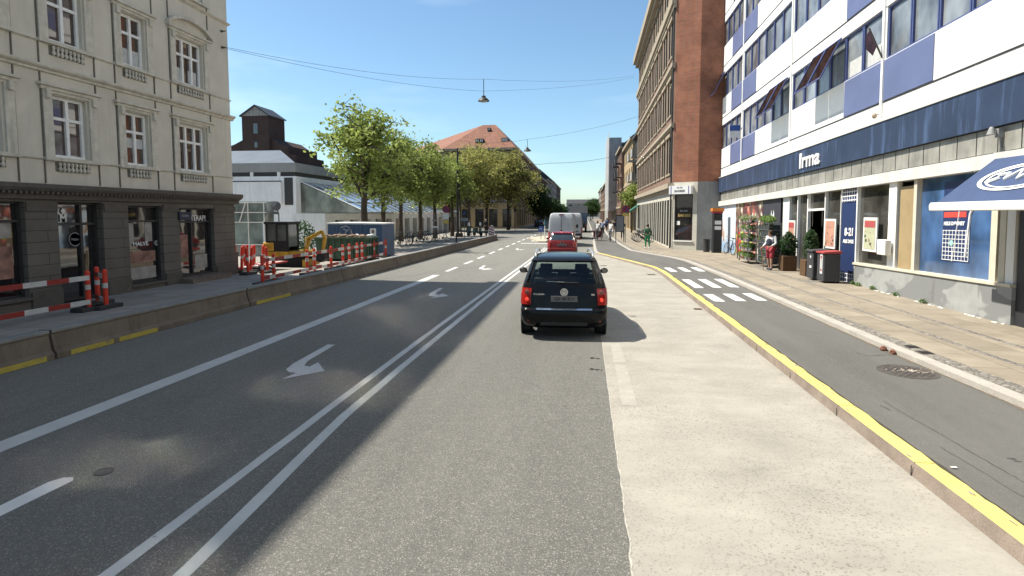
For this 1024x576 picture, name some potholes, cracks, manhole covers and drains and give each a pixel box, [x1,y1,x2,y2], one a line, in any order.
manhole cover [93,467,115,476]
crack [880,402,1023,496]
manhole cover [876,364,941,379]
